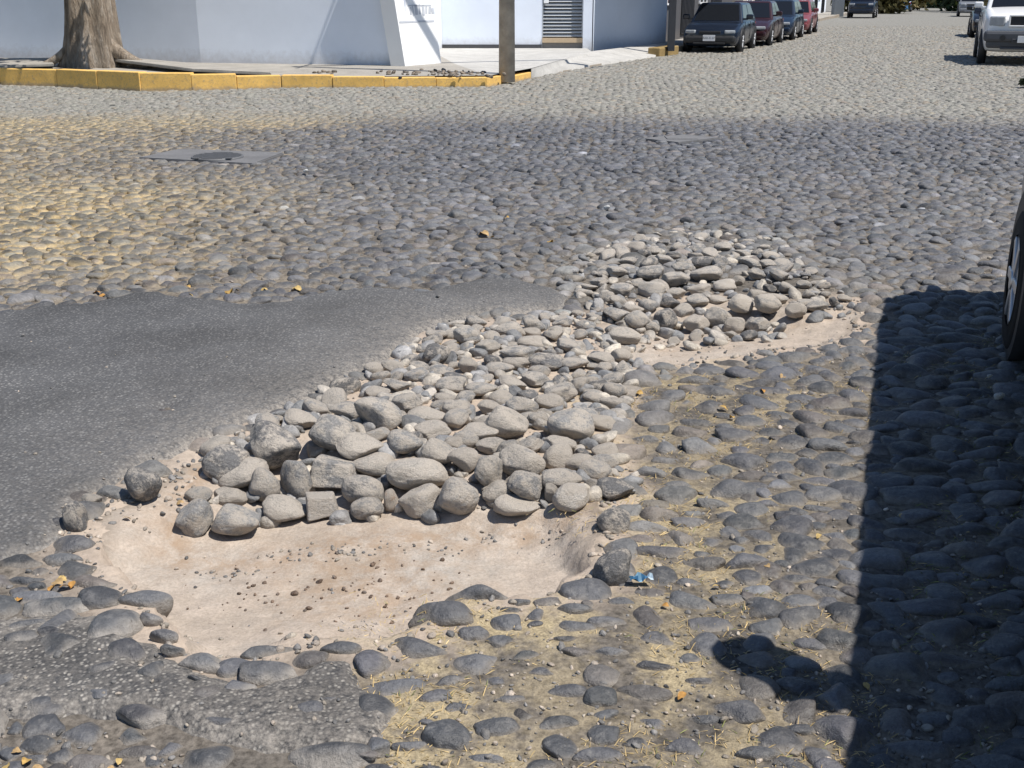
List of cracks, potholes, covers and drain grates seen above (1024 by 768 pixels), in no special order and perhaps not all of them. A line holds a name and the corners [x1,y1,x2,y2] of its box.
pothole [91,427,605,658]
manhole cover [645,134,719,145]
manhole cover [139,149,284,165]
